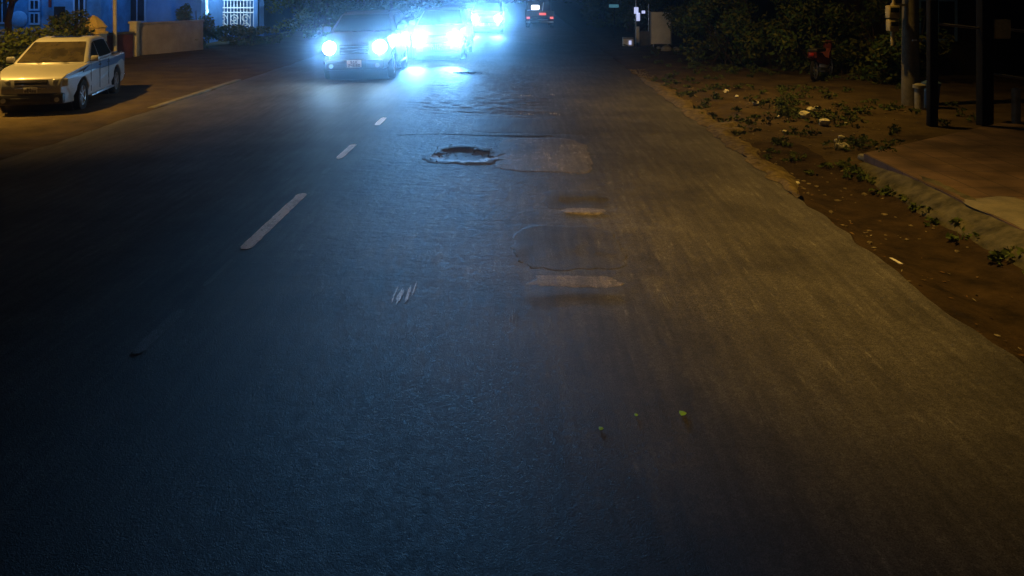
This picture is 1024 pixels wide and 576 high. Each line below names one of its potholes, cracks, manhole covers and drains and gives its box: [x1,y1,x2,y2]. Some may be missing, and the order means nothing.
pothole [421,144,505,166]
